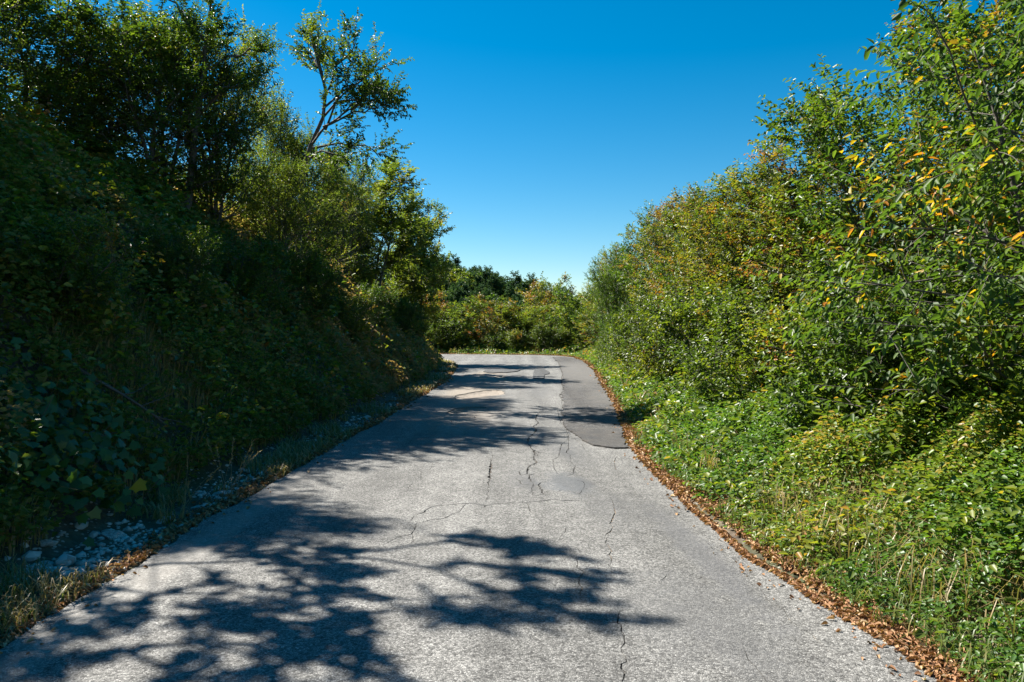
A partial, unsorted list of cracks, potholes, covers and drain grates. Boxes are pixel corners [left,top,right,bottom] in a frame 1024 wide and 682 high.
crack [388,409,616,567]
crack [615,609,627,682]
